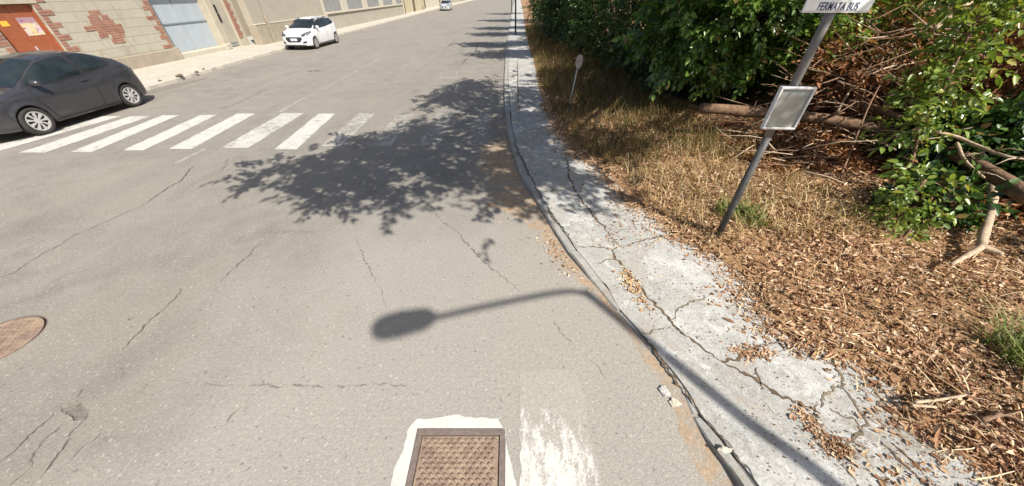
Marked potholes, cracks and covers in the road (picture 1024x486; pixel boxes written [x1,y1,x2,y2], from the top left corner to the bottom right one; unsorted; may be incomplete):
manhole cover [405,429,505,486]
crack [0,413,100,482]
crack [431,205,519,290]
pothole [60,400,89,421]
crack [721,341,925,485]
crack [5,167,192,276]
crack [223,231,314,279]
manhole cover [0,315,48,359]
crack [122,290,181,350]
crack [207,383,415,430]
crack [357,242,387,307]
crack [644,297,706,334]
